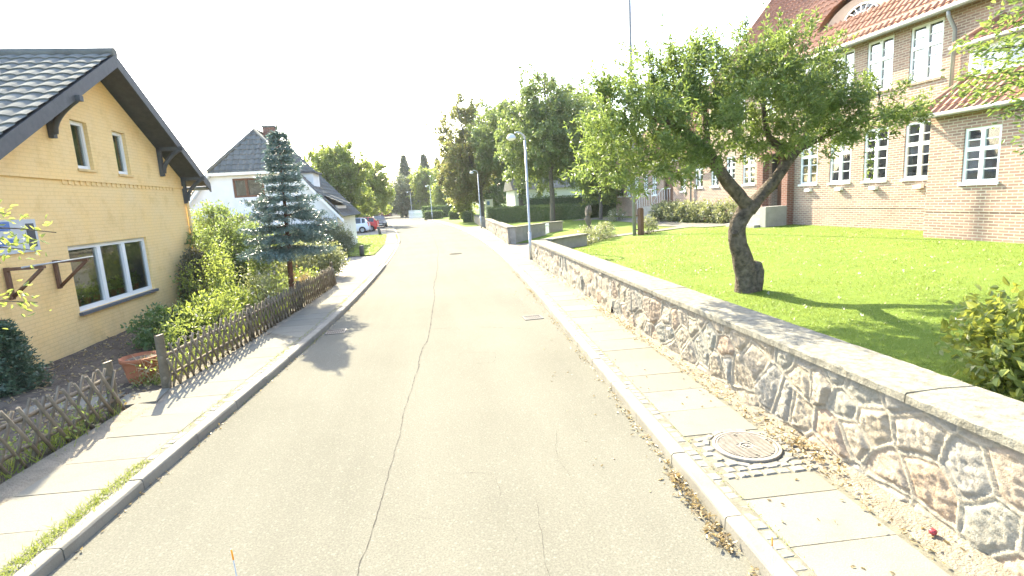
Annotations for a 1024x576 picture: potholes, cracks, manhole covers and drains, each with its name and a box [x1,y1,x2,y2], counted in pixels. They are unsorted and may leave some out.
crack [357,232,496,575]
manhole cover [712,431,782,463]
